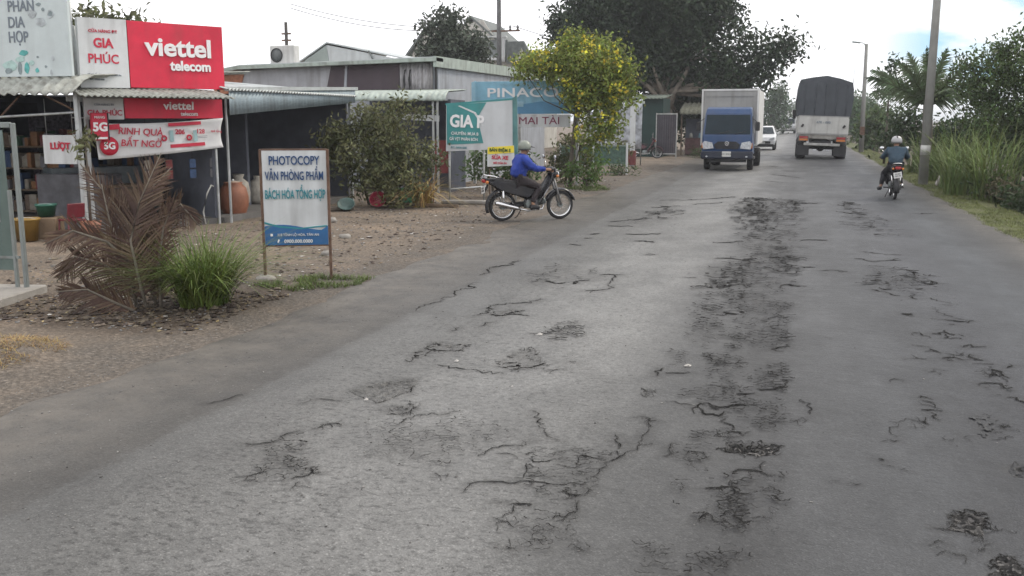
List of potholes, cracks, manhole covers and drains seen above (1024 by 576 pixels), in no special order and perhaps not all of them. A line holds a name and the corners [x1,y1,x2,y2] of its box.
crack [230,423,342,488]
crack [884,395,944,441]
crack [836,201,1024,402]
crack [367,166,816,575]
